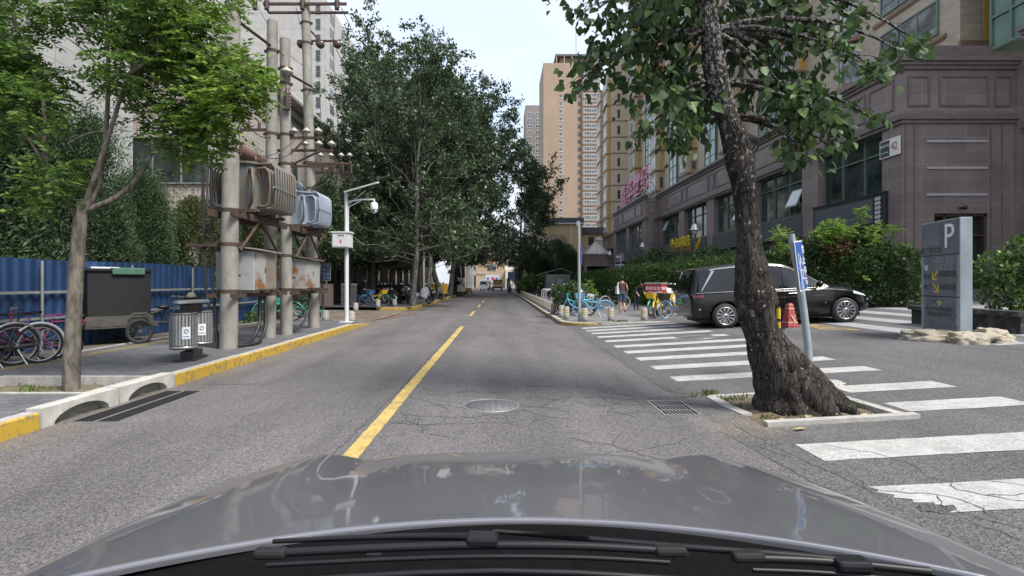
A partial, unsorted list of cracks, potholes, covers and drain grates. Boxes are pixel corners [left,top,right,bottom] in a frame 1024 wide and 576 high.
manhole cover [462,399,519,412]
crack [389,386,573,438]
drain grate [67,390,205,423]
drain grate [646,400,703,415]
crack [710,426,881,496]
